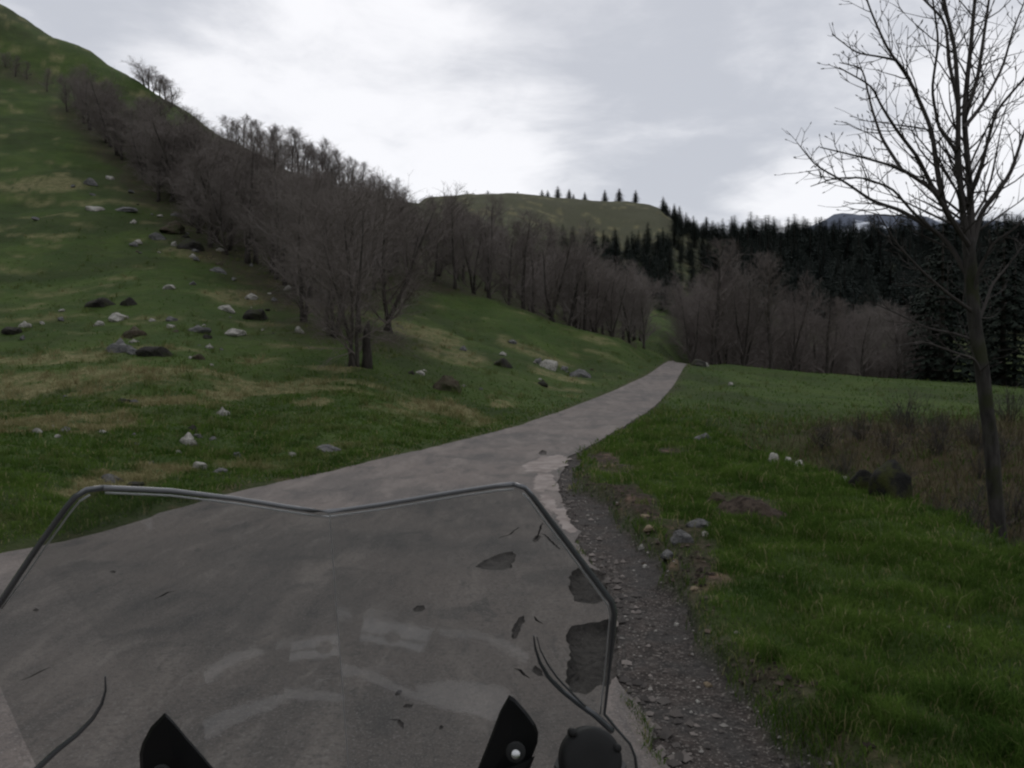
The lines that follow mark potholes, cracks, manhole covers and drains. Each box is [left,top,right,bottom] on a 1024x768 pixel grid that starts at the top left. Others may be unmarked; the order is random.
pothole [568,567,613,604]
pothole [565,619,626,694]
pothole [475,551,516,570]
crack [536,523,560,549]
